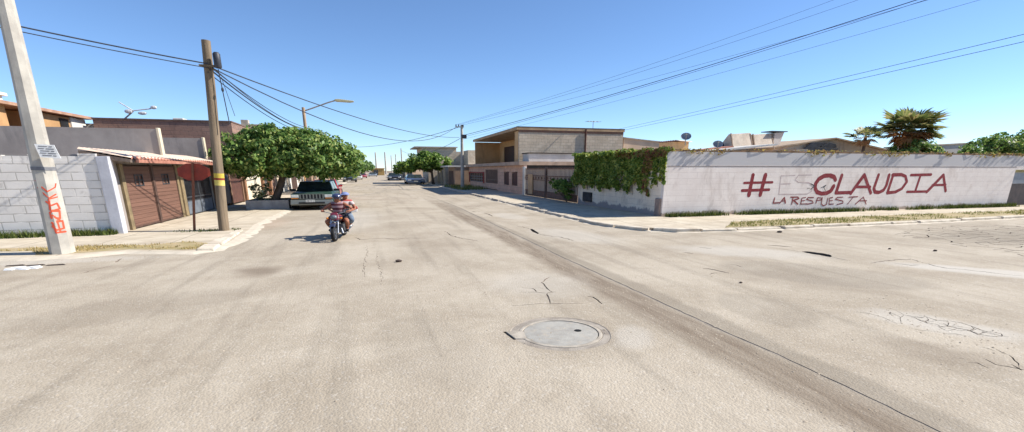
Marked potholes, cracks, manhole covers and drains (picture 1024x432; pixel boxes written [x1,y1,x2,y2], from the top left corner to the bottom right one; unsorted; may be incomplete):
crack [514,278,602,306]
crack [862,312,1023,370]
manhole cover [505,317,611,351]
